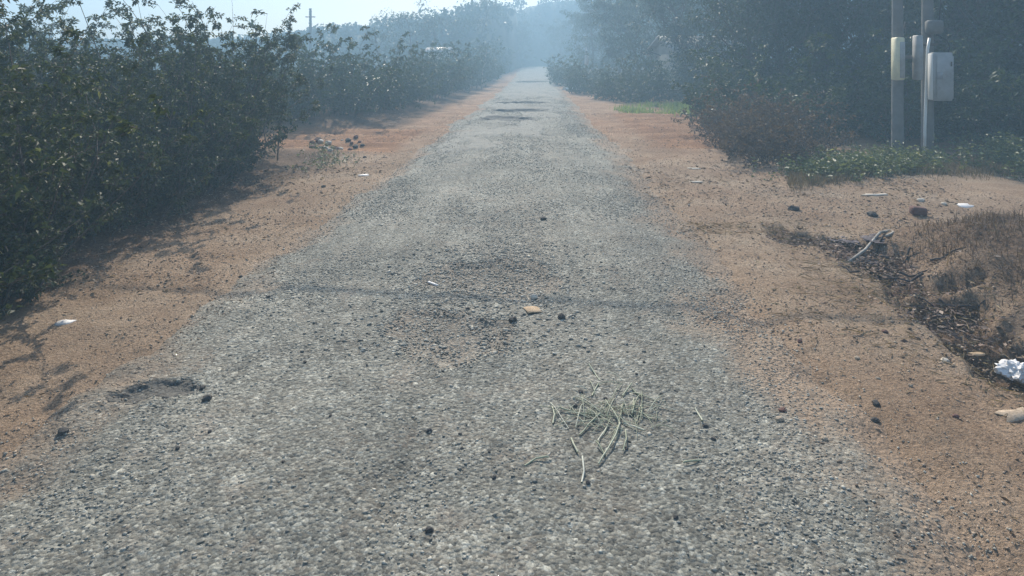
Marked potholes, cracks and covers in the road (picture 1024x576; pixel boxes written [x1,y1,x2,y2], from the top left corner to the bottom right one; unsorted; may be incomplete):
pothole [384,309,515,369]
pothole [105,379,205,405]
